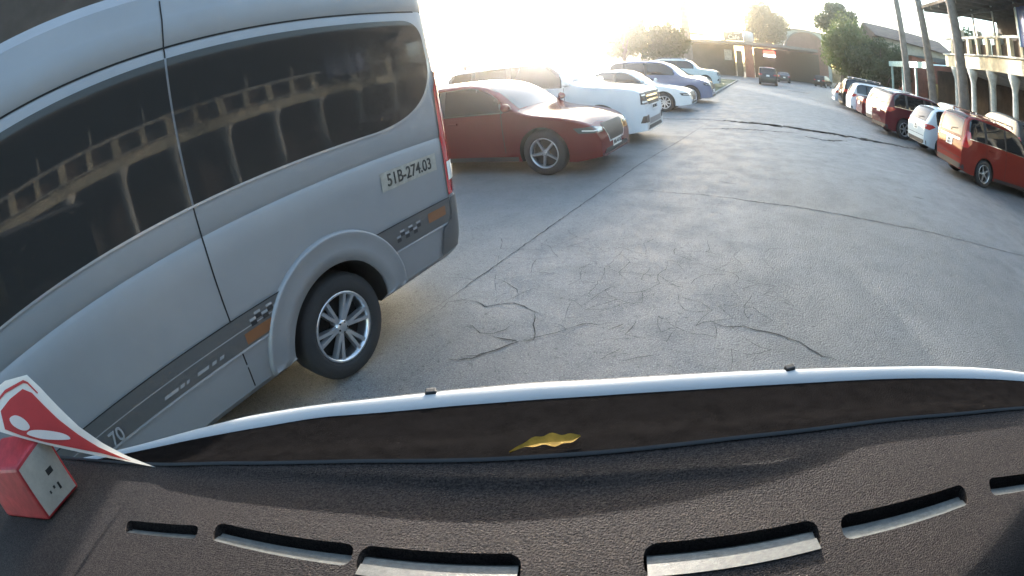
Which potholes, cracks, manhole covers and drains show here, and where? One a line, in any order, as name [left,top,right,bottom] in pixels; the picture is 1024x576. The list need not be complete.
crack [622,181,1023,256]
crack [440,230,836,369]
